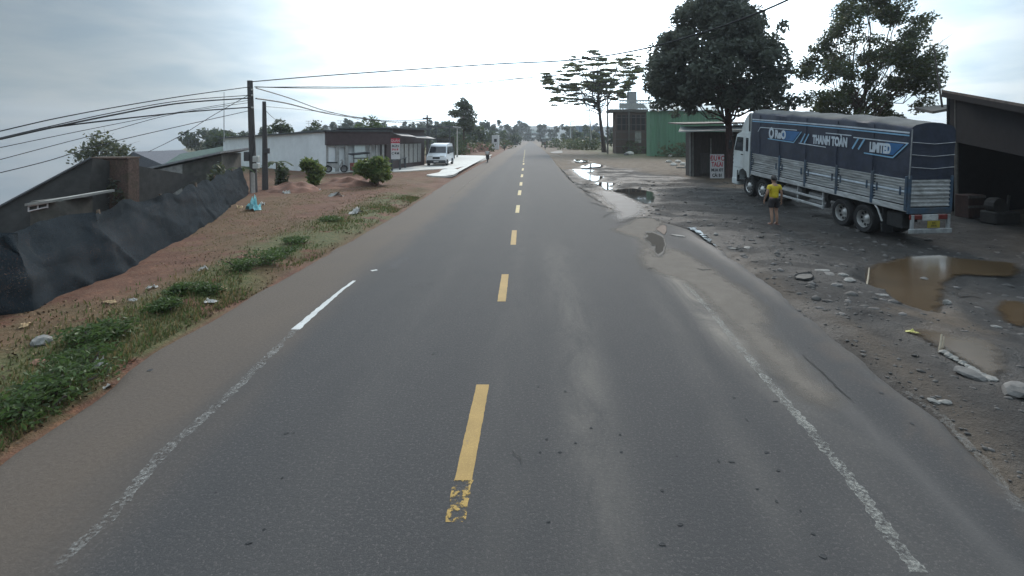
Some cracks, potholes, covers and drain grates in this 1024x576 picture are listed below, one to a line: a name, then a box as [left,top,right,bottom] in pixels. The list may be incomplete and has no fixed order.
pothole [643,231,667,257]
